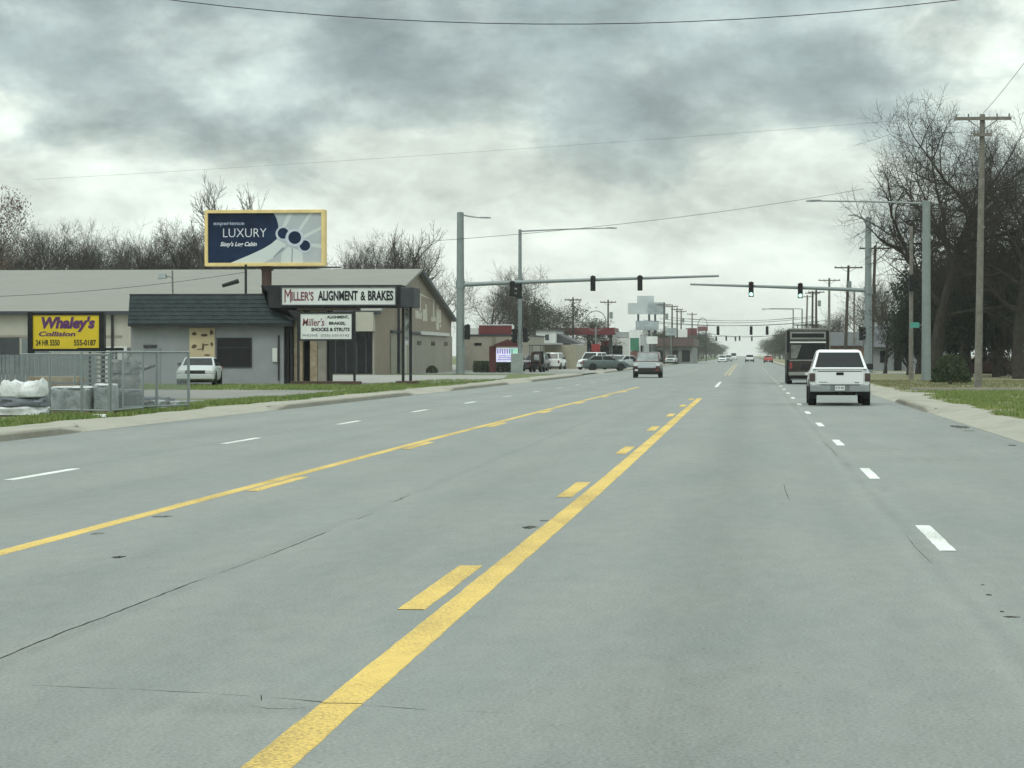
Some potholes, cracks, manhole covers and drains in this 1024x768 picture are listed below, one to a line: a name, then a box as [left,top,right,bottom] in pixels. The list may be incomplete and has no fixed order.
crack [34,685,496,713]
